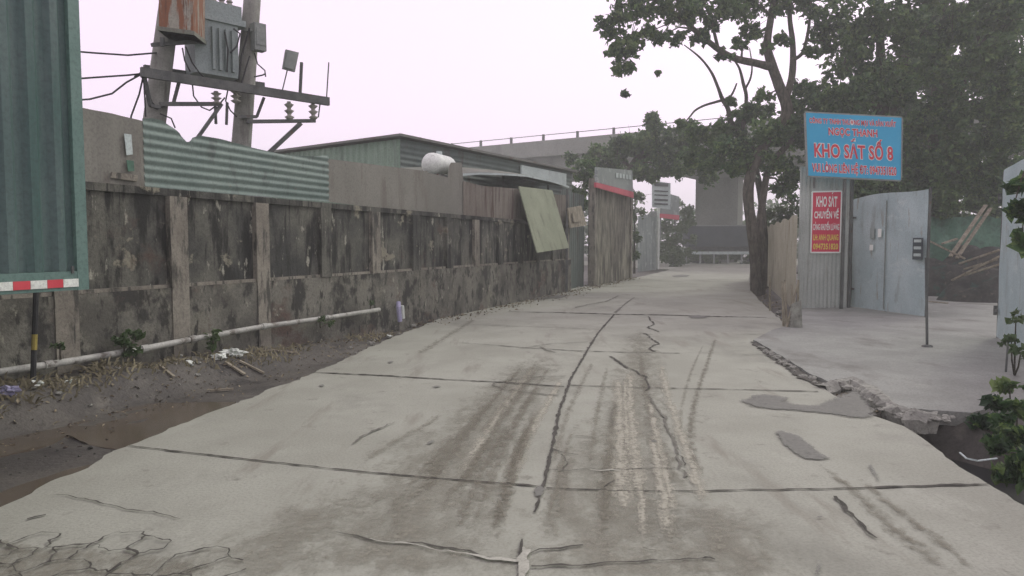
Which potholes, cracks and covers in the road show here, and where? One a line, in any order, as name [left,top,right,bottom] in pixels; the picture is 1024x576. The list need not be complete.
crack [335,531,715,567]
crack [551,356,688,487]
crack [0,494,246,576]
crack [644,316,660,351]
crack [834,496,878,538]
